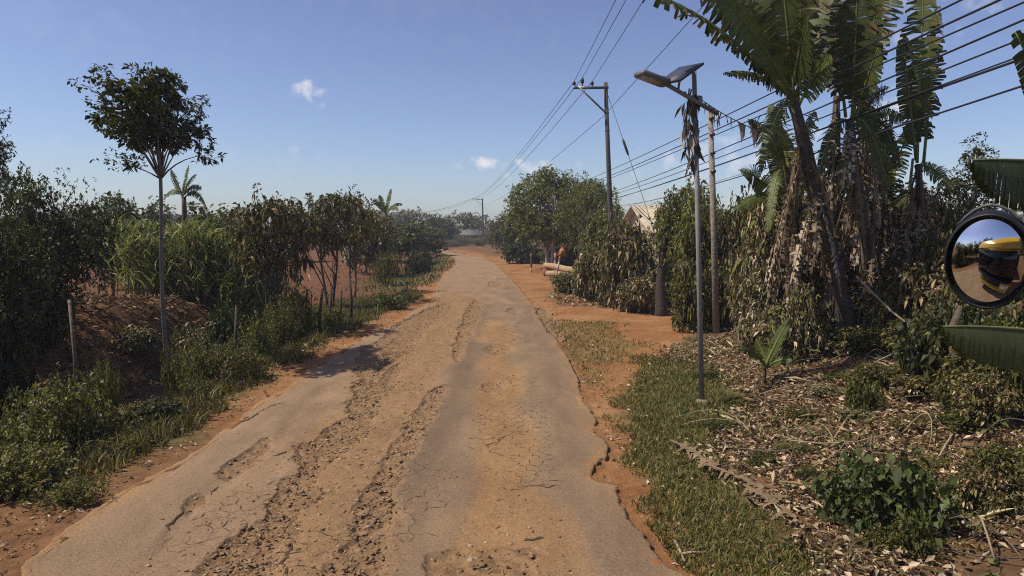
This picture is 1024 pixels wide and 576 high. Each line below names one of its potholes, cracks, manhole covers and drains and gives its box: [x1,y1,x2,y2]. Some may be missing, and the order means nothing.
pothole [452,299,486,362]
pothole [320,385,450,576]
pothole [193,363,401,576]
crack [161,480,275,552]
pothole [422,547,548,576]
crack [470,376,564,490]
crack [396,460,459,542]
